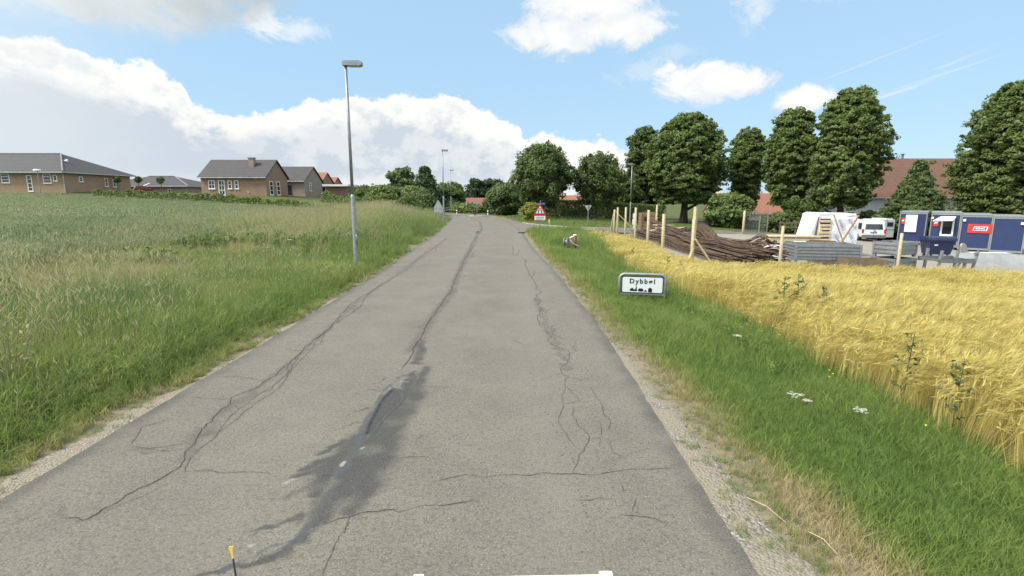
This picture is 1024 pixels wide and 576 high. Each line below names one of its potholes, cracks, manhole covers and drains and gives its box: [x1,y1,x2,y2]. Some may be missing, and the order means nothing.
crack [323,500,471,572]
crack [63,242,442,520]
crack [434,246,664,522]
